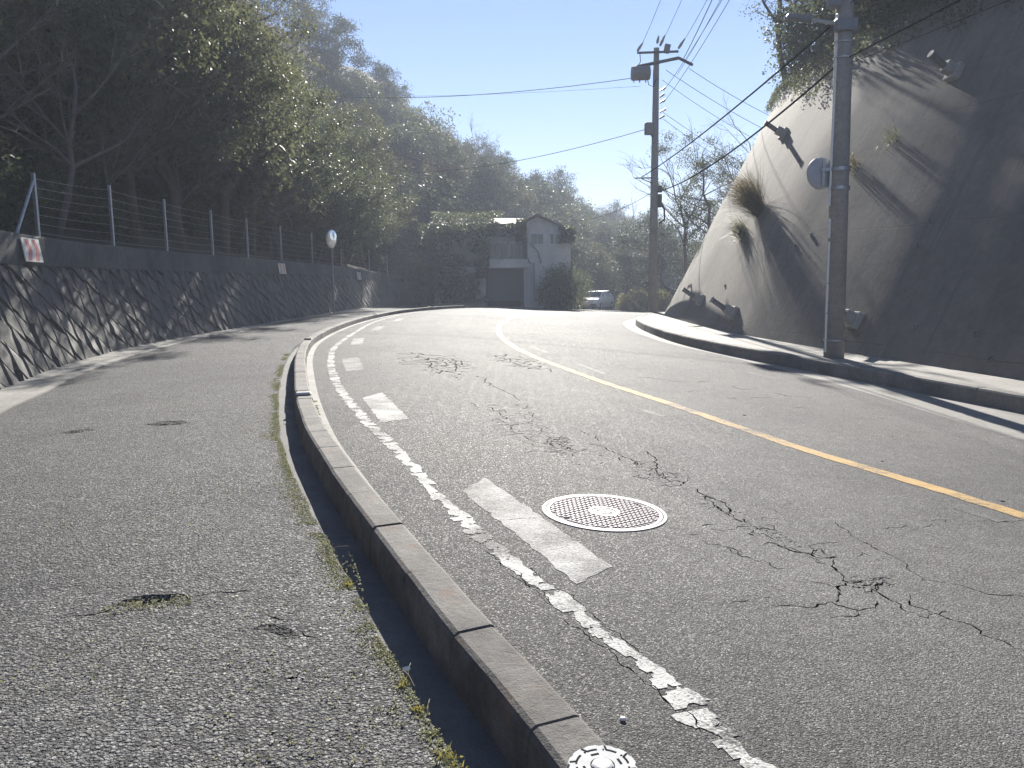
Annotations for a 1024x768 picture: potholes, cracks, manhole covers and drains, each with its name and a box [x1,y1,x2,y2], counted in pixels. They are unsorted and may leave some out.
pothole [250,623,301,639]
crack [487,354,552,372]
manhole cover [542,494,668,532]
pothole [111,593,191,607]
crack [471,387,1023,651]
crack [398,353,491,385]
